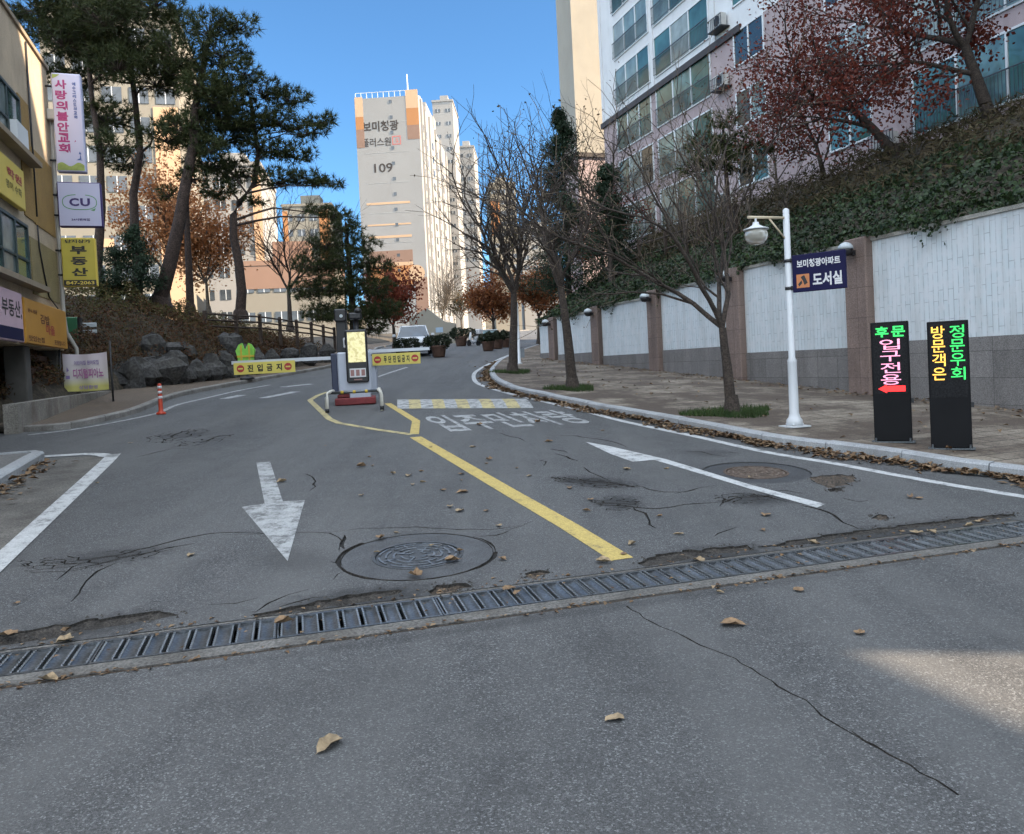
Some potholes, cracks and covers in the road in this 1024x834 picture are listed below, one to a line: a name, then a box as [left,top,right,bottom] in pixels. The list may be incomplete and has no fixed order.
pothole [0,609,188,650]
pothole [753,512,1019,548]
pothole [632,543,757,568]
crack [208,520,534,612]
crack [20,532,264,602]
pothole [807,474,860,489]
crack [541,436,868,529]
crack [626,606,960,795]
pothole [423,580,474,598]
manhole cover [341,534,493,580]
manhole cover [704,463,811,483]
pothole [520,568,553,582]
